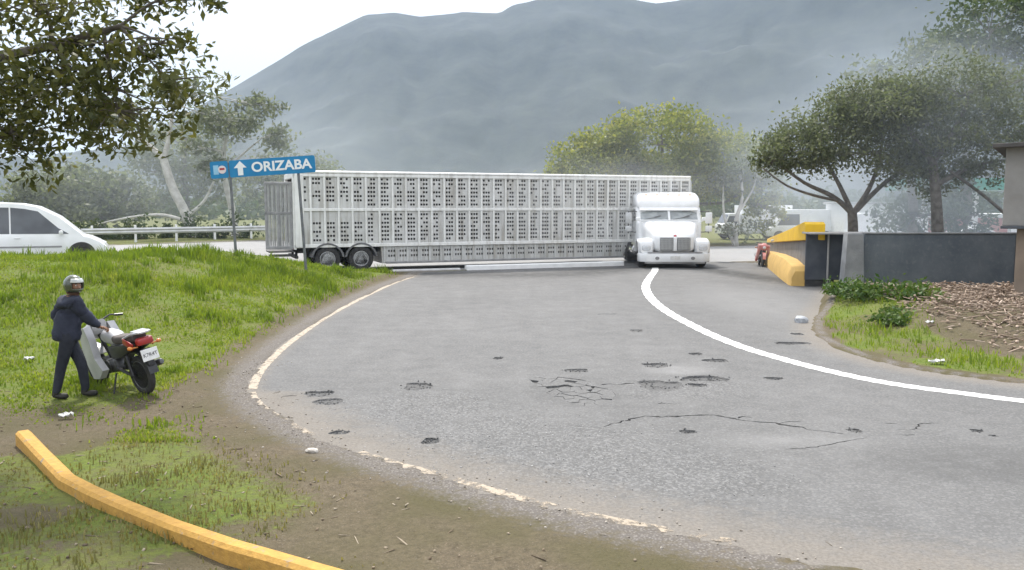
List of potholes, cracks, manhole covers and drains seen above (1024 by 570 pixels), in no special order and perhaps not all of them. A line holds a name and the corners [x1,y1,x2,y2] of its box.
crack [529,376,863,449]
pothole [400,380,433,391]
pothole [637,379,684,391]
pothole [675,374,734,382]
